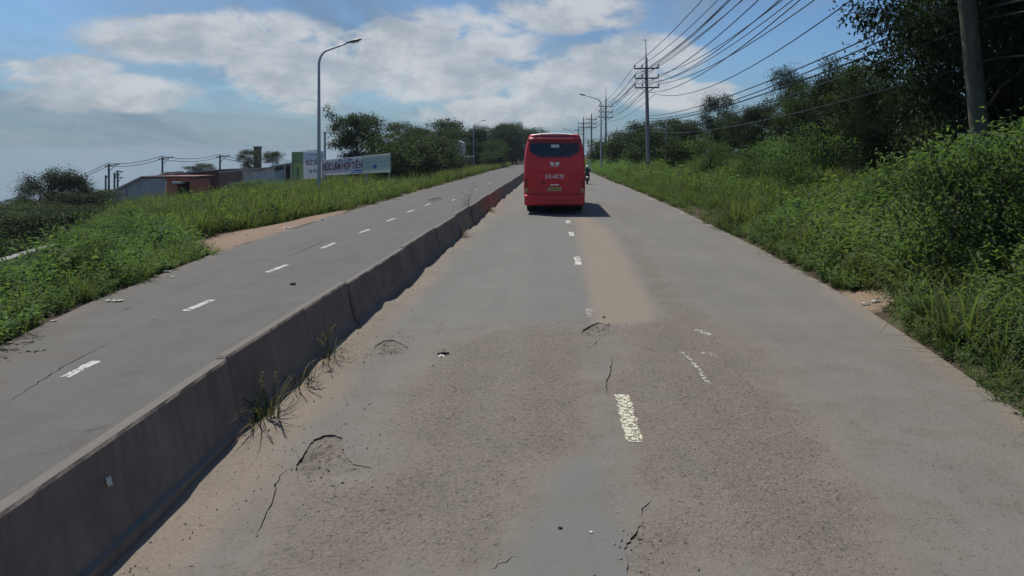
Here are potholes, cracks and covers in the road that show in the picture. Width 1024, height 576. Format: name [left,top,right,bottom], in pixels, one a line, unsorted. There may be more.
crack [3,345,104,404]
crack [256,469,289,534]
crack [595,323,613,395]
